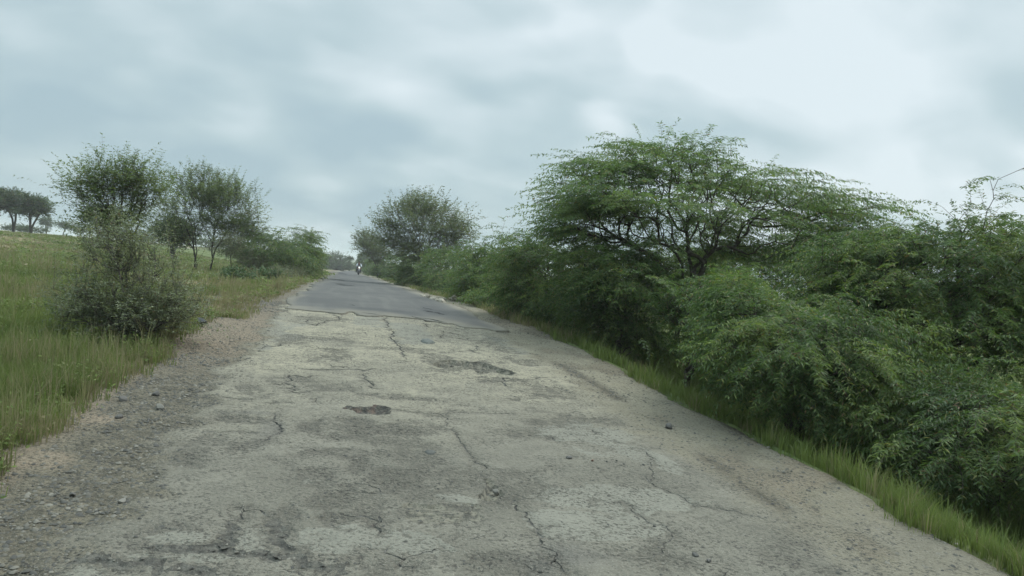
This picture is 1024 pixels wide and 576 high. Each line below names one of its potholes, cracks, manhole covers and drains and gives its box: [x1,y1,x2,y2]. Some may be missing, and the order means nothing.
crack [62,507,445,576]
crack [398,377,546,477]
pothole [433,360,516,376]
crack [499,495,569,574]
crack [295,305,478,357]
crack [335,483,389,495]
crack [596,501,674,560]
pothole [343,404,391,415]
crack [209,348,379,442]
crack [643,451,766,520]
